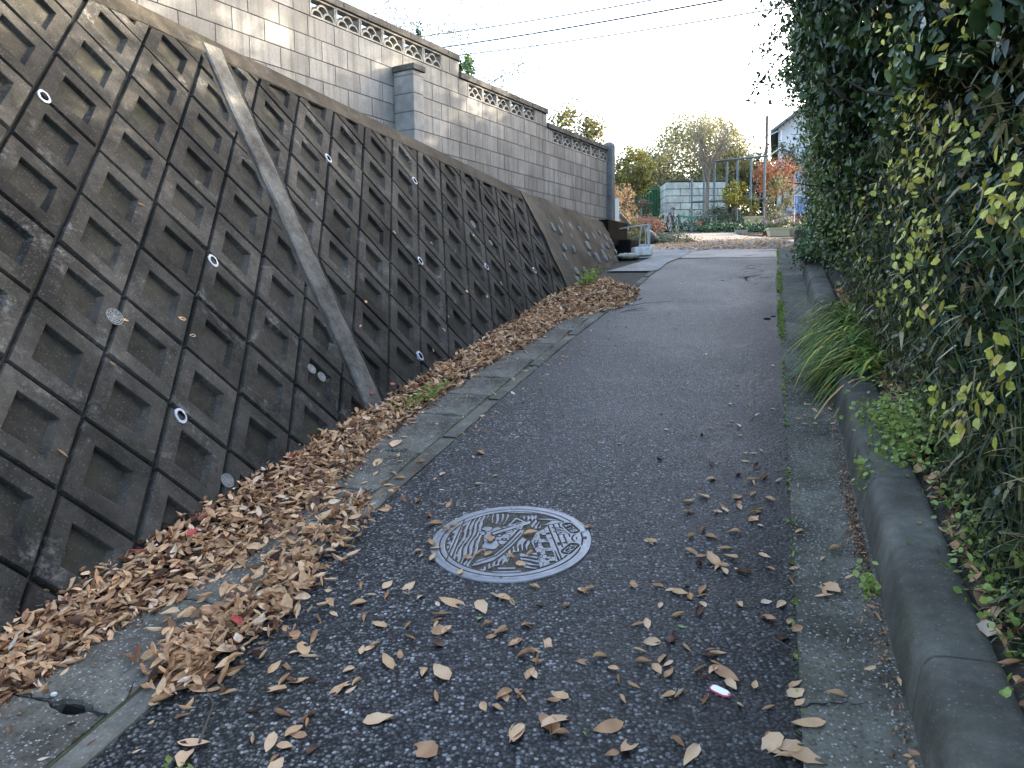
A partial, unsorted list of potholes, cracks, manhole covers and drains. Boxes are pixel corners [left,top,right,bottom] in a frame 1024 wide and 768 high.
pothole [51,704,86,715]
manhole cover [430,506,592,583]
